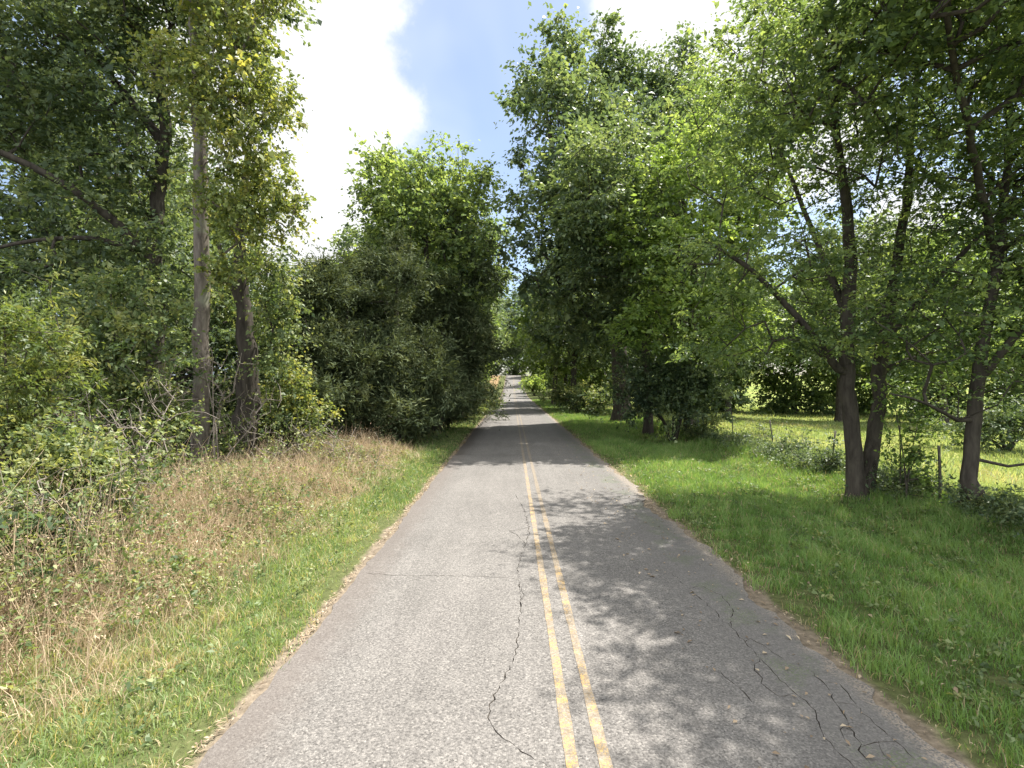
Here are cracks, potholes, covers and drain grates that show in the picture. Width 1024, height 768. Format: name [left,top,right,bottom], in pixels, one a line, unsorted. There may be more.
crack [675,576,916,766]
crack [370,496,546,765]
